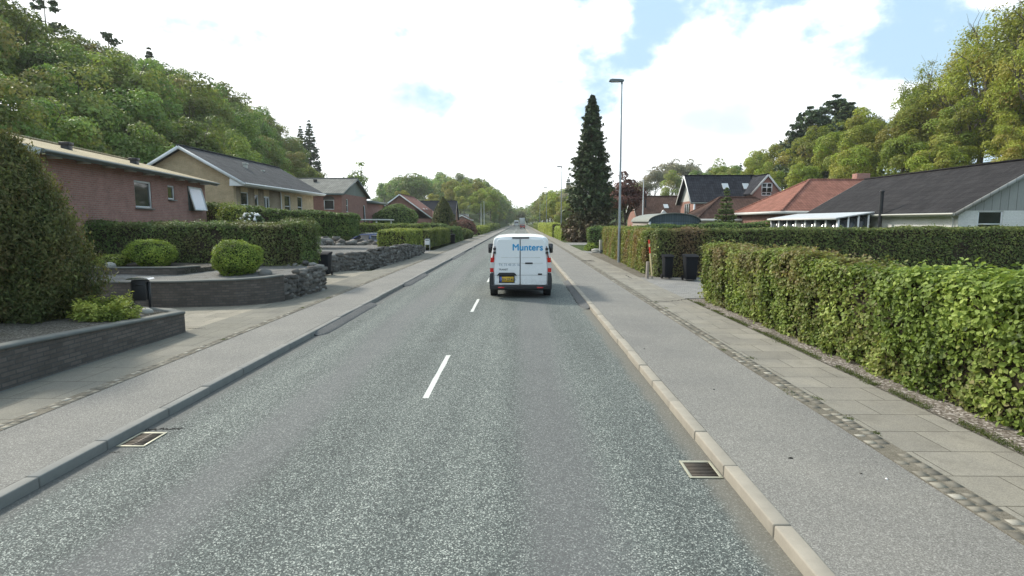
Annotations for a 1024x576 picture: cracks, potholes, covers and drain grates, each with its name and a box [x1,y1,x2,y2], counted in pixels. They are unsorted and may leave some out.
drain grate [116,432,168,447]
drain grate [679,461,723,479]
